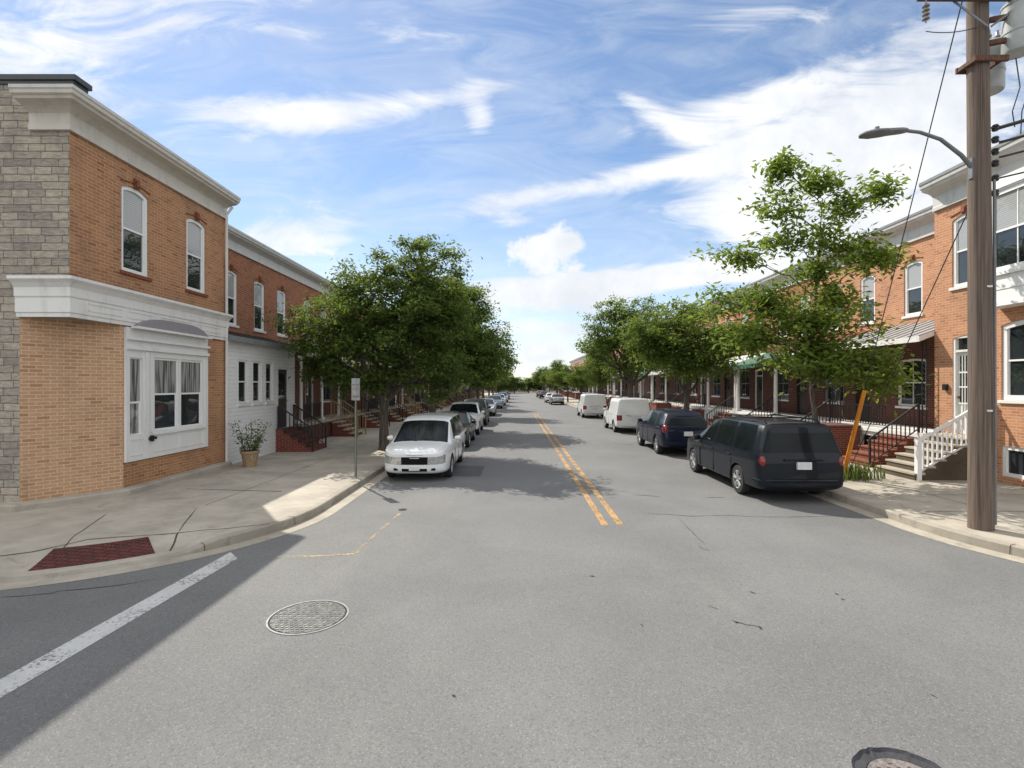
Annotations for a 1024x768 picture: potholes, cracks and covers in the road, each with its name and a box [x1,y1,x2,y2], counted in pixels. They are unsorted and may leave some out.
crack [637,495,818,550]
crack [9,580,149,597]
manhole cover [266,600,349,635]
manhole cover [851,747,941,768]
